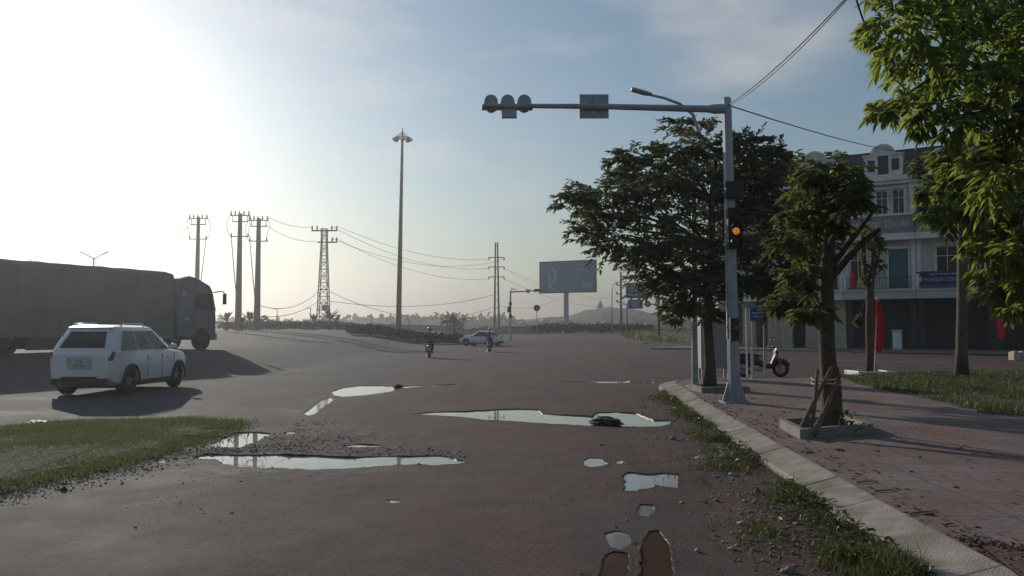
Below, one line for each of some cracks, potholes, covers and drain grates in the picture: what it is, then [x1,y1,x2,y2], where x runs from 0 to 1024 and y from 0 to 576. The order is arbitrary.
pothole [633,529,679,576]
pothole [191,453,468,470]
pothole [330,384,458,397]
pothole [580,457,610,468]
pothole [414,408,673,427]
pothole [302,397,336,416]
pothole [599,529,635,553]
pothole [198,431,273,448]
pothole [619,471,683,491]
pothole [593,549,634,576]
pothole [633,503,658,519]
